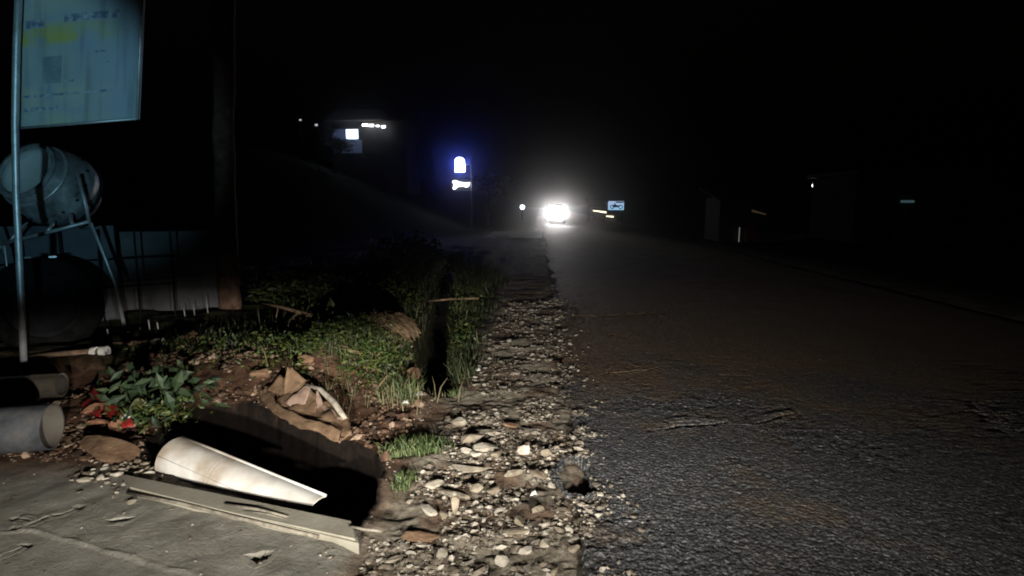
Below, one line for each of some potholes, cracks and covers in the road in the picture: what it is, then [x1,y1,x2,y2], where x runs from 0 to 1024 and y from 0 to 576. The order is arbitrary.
crack [968,399,1024,433]
crack [0,507,79,560]
pothole [549,455,603,500]
crack [649,410,799,433]
